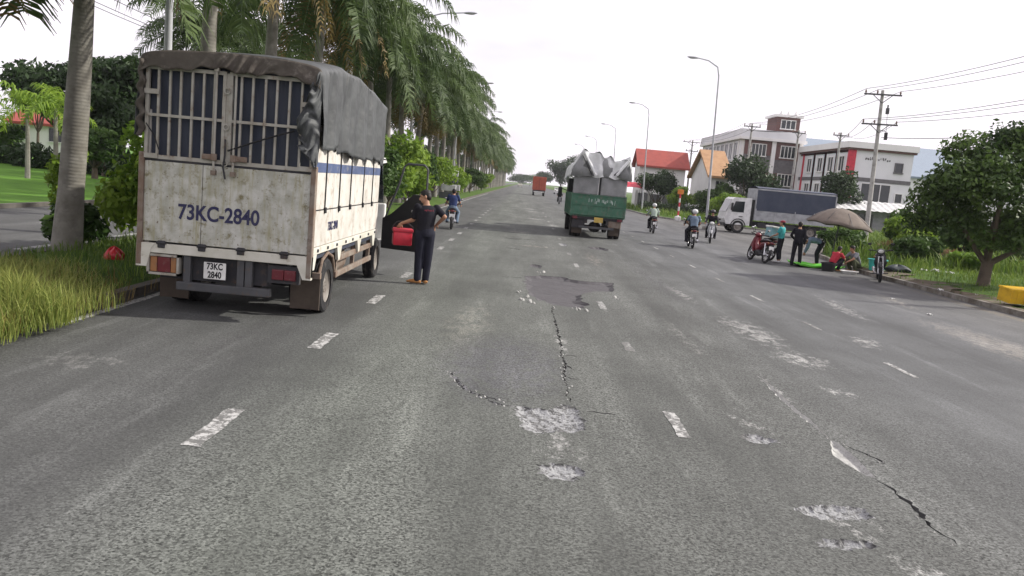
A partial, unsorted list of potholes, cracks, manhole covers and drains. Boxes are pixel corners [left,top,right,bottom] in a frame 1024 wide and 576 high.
crack [760,377,957,545]
pothole [737,434,780,444]
pothole [514,404,587,434]
pothole [794,504,875,521]
crack [551,308,577,402]
crack [447,371,514,407]
pothole [536,463,586,482]
pothole [816,538,877,551]
